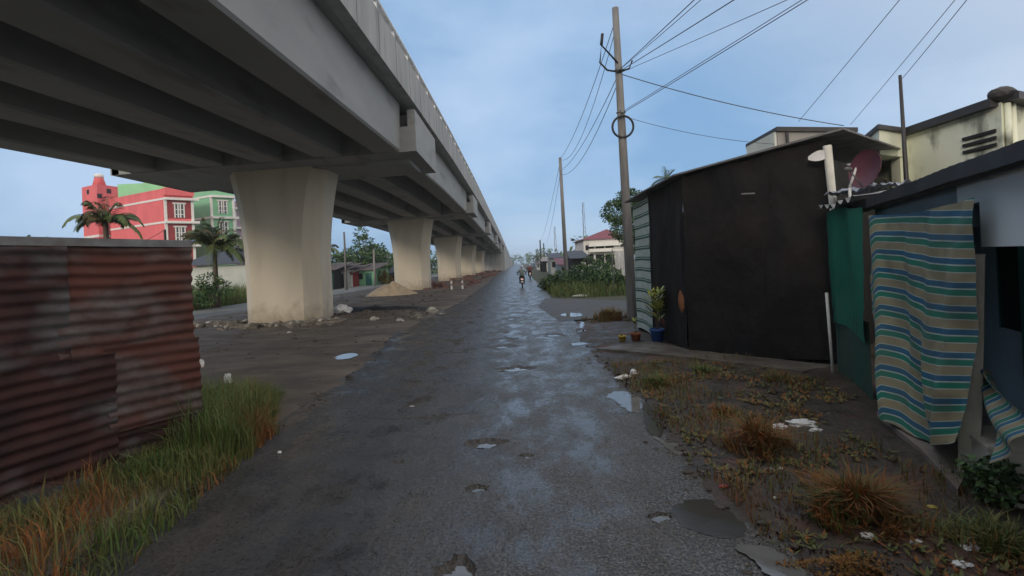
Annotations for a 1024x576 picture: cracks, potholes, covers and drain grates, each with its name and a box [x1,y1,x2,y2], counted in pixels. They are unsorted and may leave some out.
pothole [464,484,490,492]
pothole [463,438,510,449]
pothole [431,553,477,576]
pothole [646,511,672,523]
